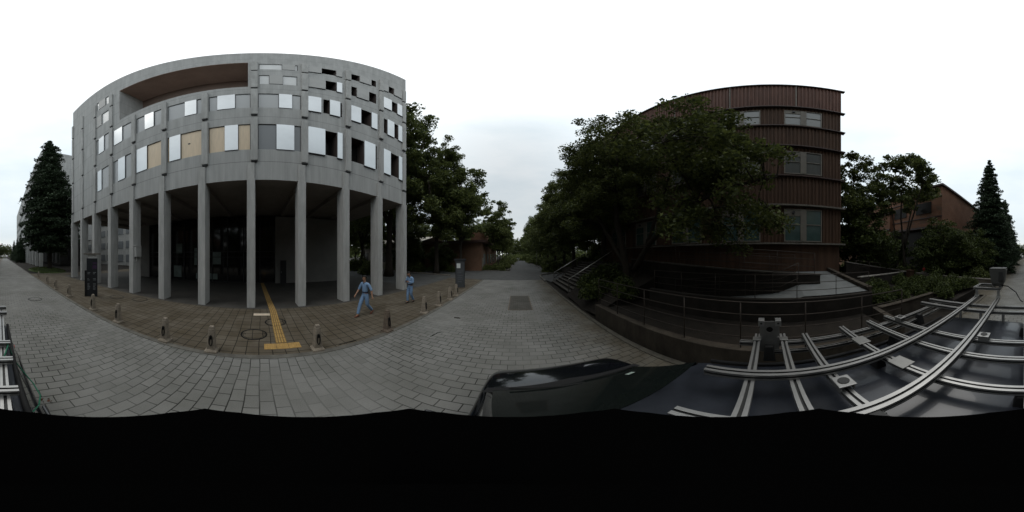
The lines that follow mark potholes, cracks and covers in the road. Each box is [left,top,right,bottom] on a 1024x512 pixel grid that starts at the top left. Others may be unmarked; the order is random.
manhole cover [240,329,267,340]
manhole cover [508,296,533,310]
